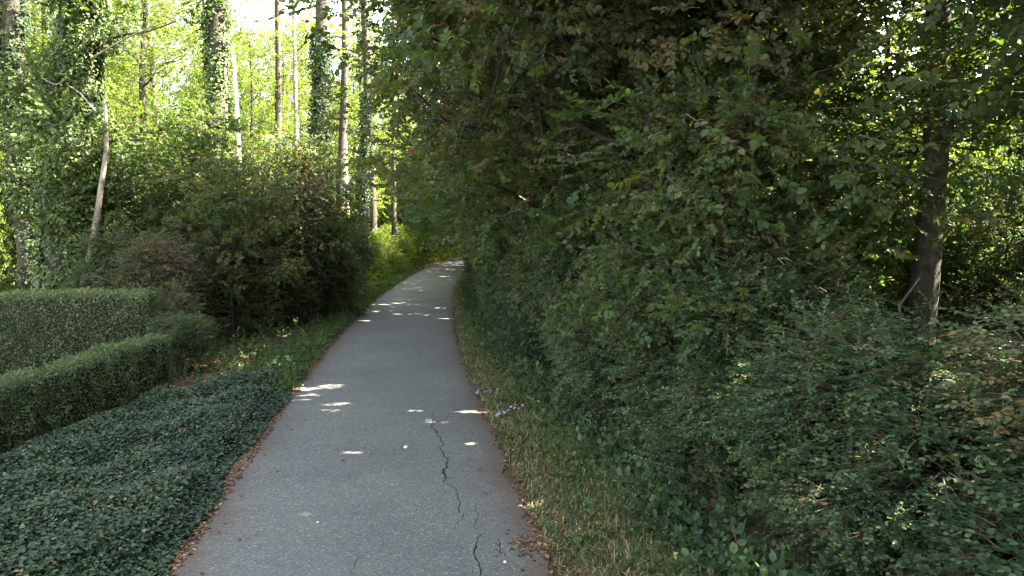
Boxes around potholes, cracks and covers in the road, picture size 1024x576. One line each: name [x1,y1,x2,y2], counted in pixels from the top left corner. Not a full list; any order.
crack [431,415,505,576]
